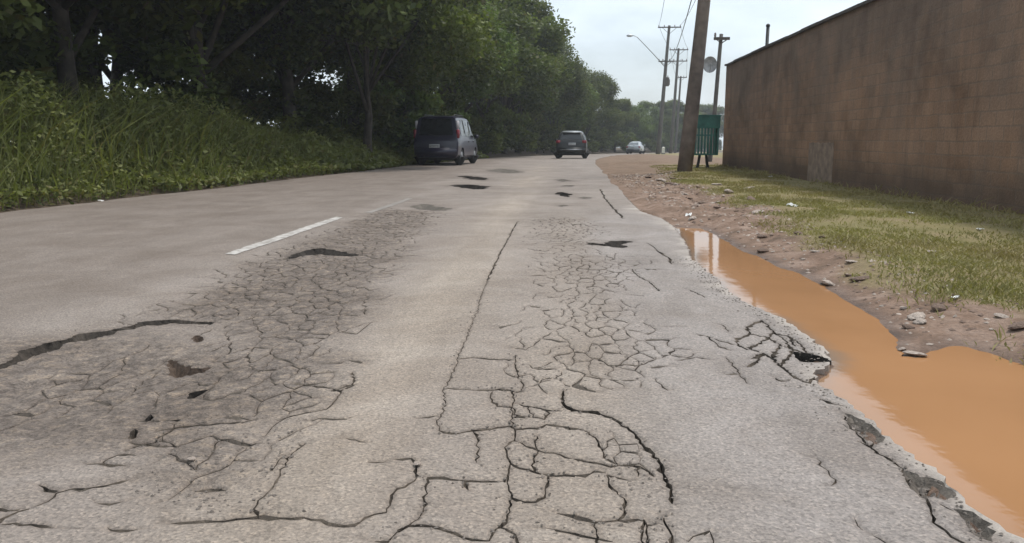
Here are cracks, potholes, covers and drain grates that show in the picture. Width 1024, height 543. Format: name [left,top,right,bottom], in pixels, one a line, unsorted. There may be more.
pothole [167,360,212,378]
pothole [793,352,831,363]
pothole [286,248,359,259]
crack [0,208,965,543]
